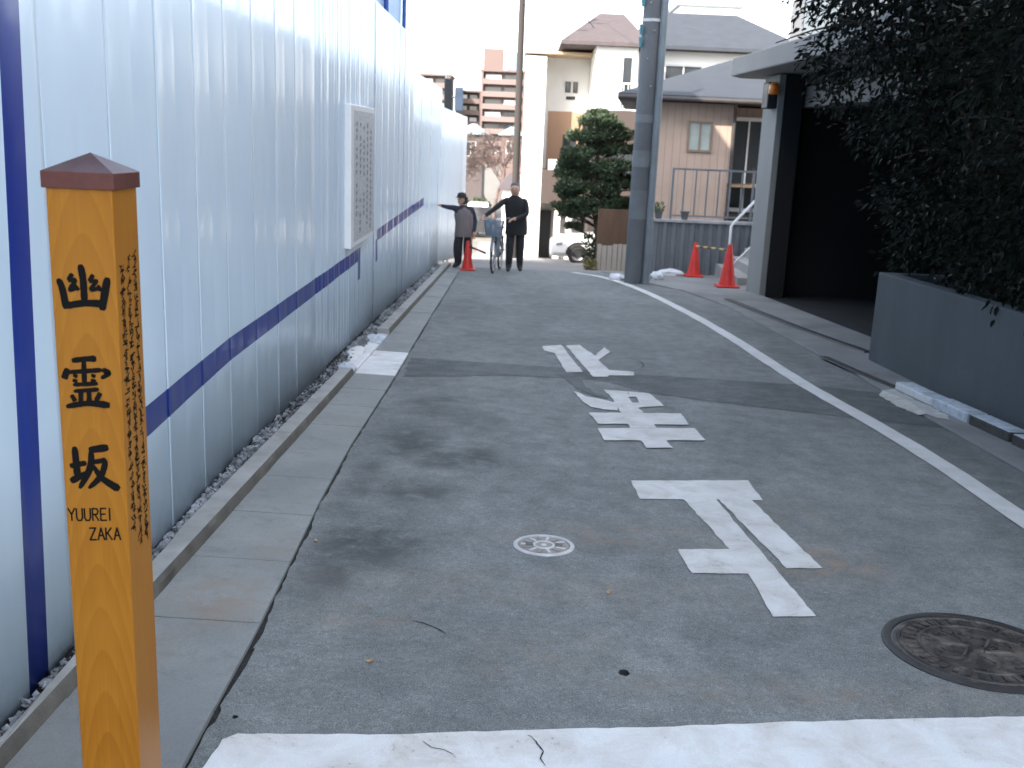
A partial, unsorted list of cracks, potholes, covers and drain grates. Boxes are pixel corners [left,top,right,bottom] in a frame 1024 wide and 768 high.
manhole cover [513,534,575,557]
manhole cover [881,612,1024,695]
